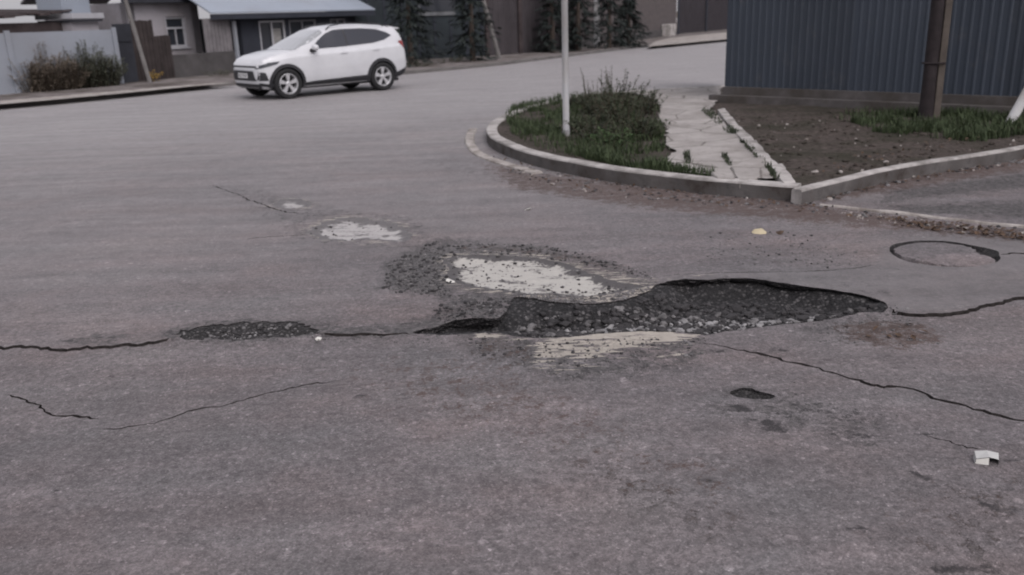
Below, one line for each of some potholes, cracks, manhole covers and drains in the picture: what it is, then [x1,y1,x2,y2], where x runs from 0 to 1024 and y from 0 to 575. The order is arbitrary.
crack [10,380,340,430]
pothole [172,321,319,341]
crack [217,186,295,213]
pothole [412,278,888,338]
crack [704,343,1024,449]
pothole [730,388,775,399]
pothole [442,254,644,297]
